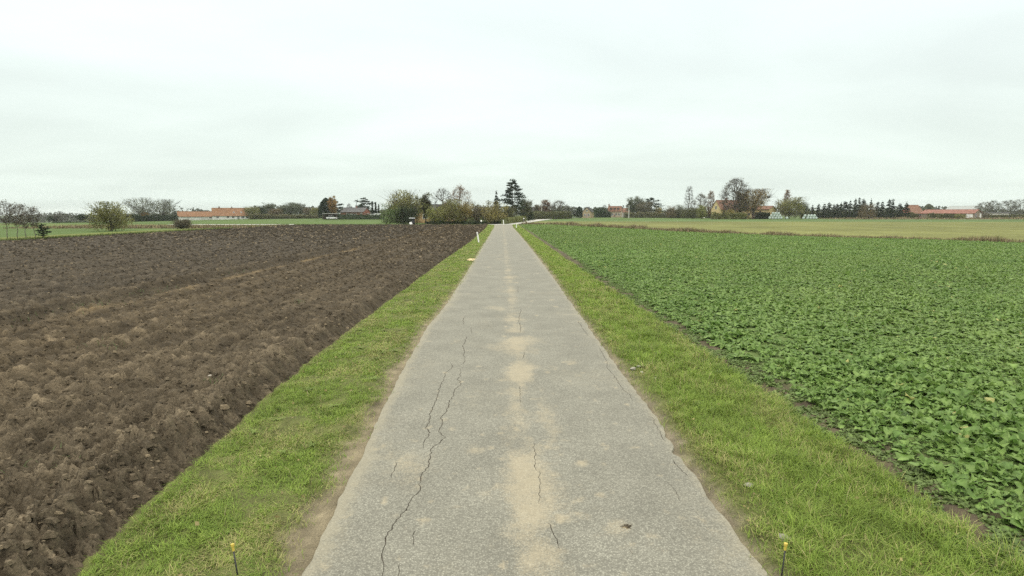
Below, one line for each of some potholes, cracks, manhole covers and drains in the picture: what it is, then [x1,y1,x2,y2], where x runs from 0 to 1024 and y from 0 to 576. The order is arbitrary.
crack [381,318,472,576]
